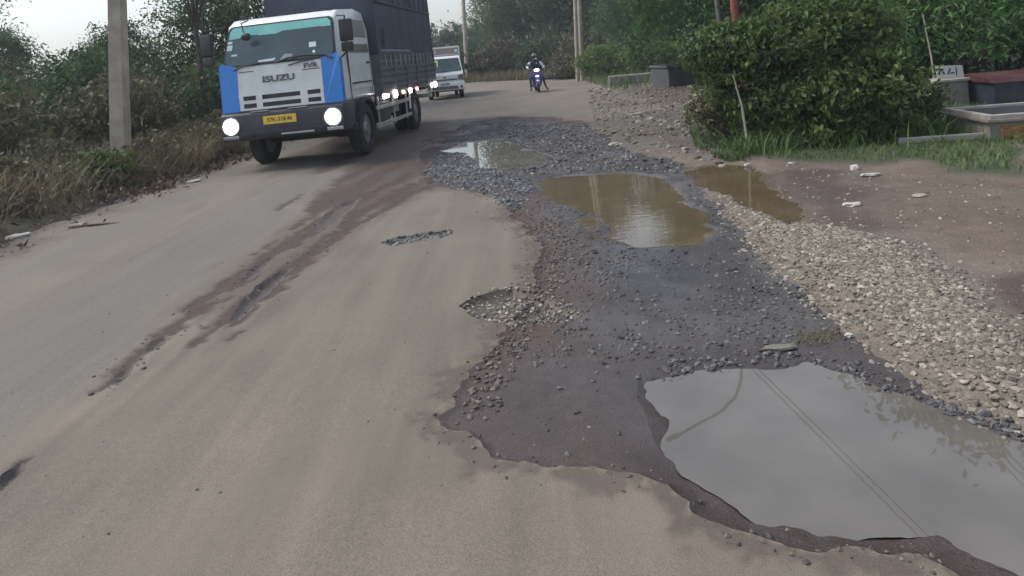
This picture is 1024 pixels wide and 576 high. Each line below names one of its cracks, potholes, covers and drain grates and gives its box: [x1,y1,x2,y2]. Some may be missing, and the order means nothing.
pothole [413,117,1012,576]
pothole [389,230,452,246]
